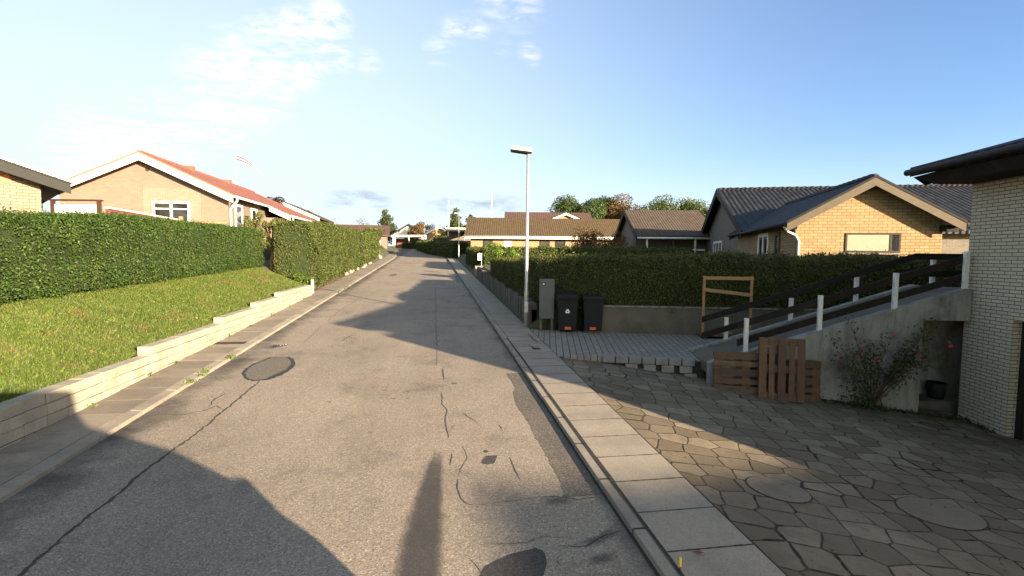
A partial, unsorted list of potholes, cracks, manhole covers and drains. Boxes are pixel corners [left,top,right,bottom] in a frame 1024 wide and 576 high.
manhole cover [894,497,990,531]
manhole cover [745,476,813,503]
crack [5,380,260,576]
crack [450,448,486,505]
